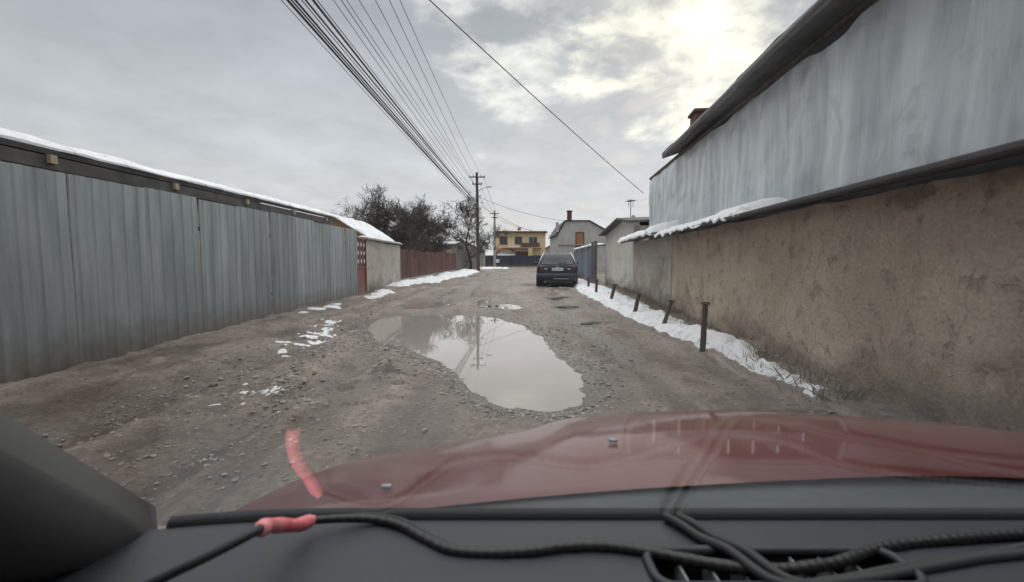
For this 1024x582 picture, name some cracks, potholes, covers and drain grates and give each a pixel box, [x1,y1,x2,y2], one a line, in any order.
pothole [470,299,497,308]
pothole [358,313,609,418]
pothole [396,300,456,309]
